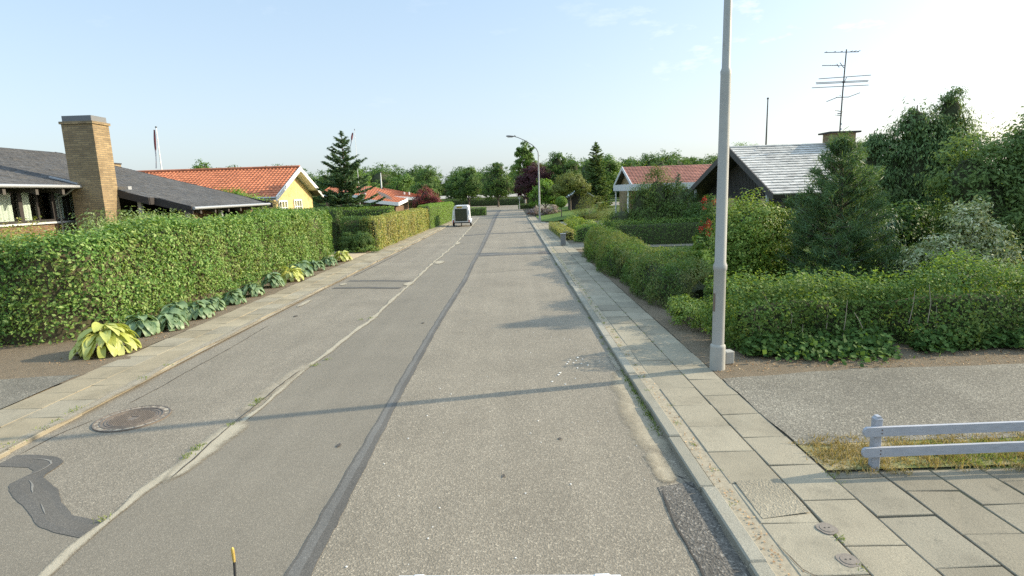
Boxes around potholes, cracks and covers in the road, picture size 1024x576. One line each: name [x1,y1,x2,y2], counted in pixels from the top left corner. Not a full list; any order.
utility cover [815,522,839,536]
utility cover [835,553,861,568]
manhole cover [92,405,172,433]
